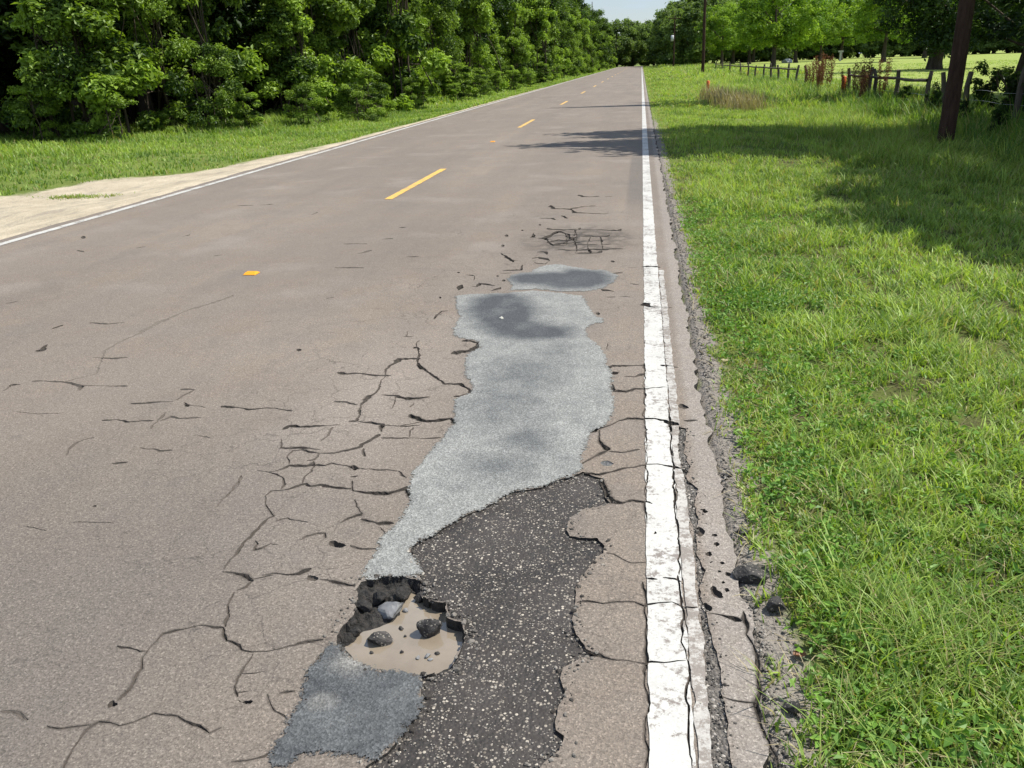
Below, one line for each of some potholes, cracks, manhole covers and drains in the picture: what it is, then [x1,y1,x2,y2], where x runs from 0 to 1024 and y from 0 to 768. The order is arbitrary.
crack [3,331,479,768]
pothole [337,576,465,675]
crack [711,611,780,768]
crack [457,195,622,291]
crack [577,344,697,768]
